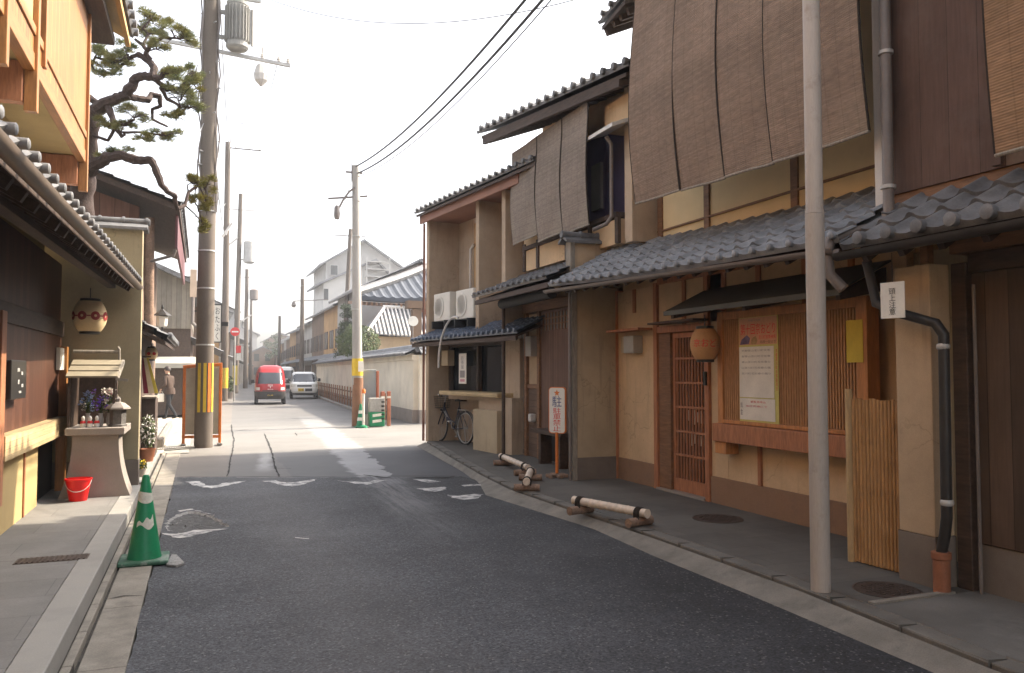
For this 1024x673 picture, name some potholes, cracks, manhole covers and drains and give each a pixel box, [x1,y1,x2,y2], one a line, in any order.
manhole cover [692,514,744,523]
crack [178,433,457,478]
manhole cover [852,581,924,598]
